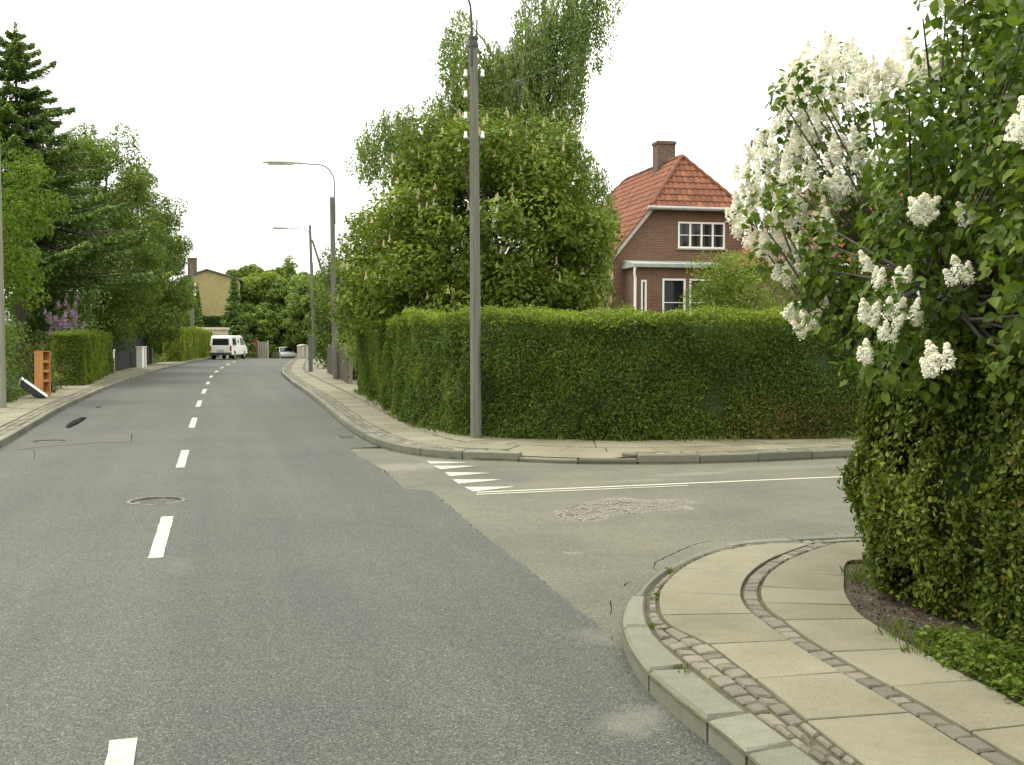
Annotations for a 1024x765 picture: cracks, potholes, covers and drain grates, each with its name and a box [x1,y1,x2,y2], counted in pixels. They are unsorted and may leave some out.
pothole [65,417,87,428]
manhole cover [127,496,186,505]
